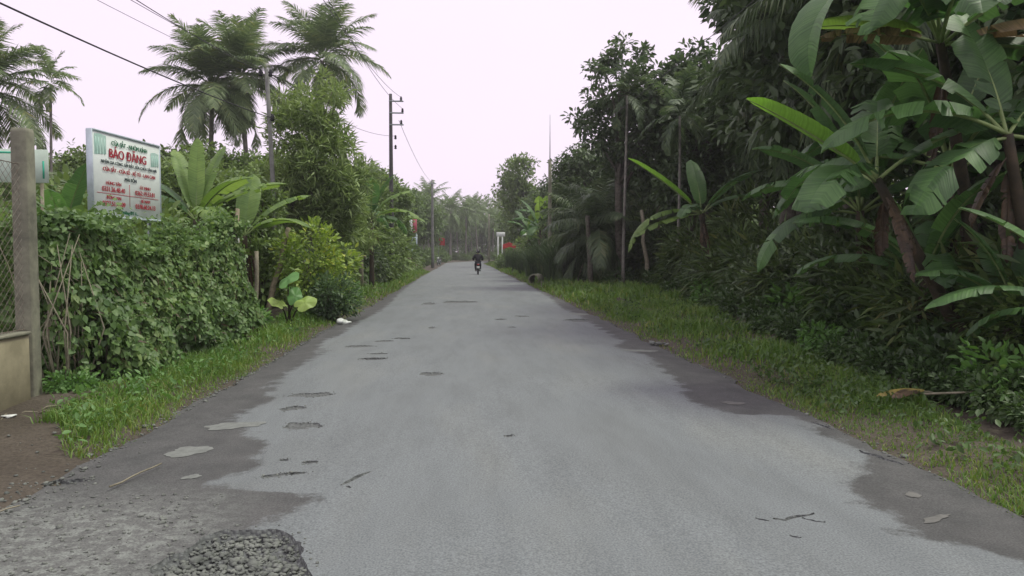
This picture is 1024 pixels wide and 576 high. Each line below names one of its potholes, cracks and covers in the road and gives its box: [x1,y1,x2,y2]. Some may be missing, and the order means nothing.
crack [755,512,825,538]
crack [341,471,372,488]
pothole [284,422,323,430]
